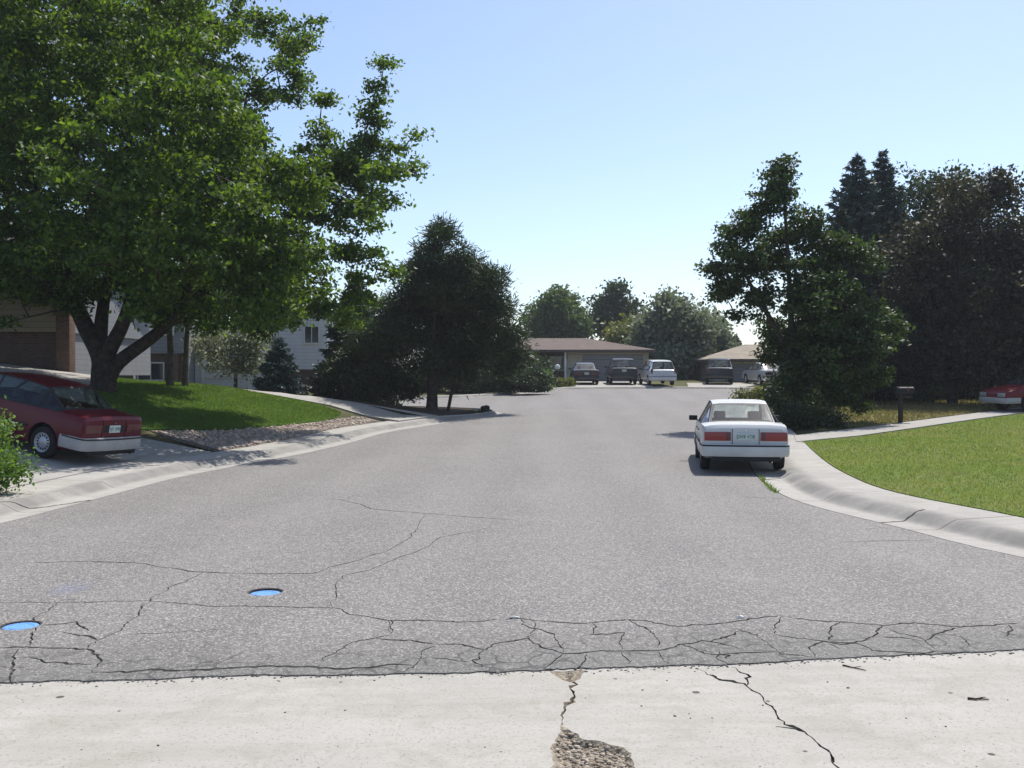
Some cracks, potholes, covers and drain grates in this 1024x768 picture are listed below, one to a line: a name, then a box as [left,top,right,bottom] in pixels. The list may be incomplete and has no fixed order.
manhole cover [0,620,43,630]
manhole cover [247,588,284,596]
crack [1,493,1018,768]
pothole [550,670,585,683]
pothole [550,722,635,768]
